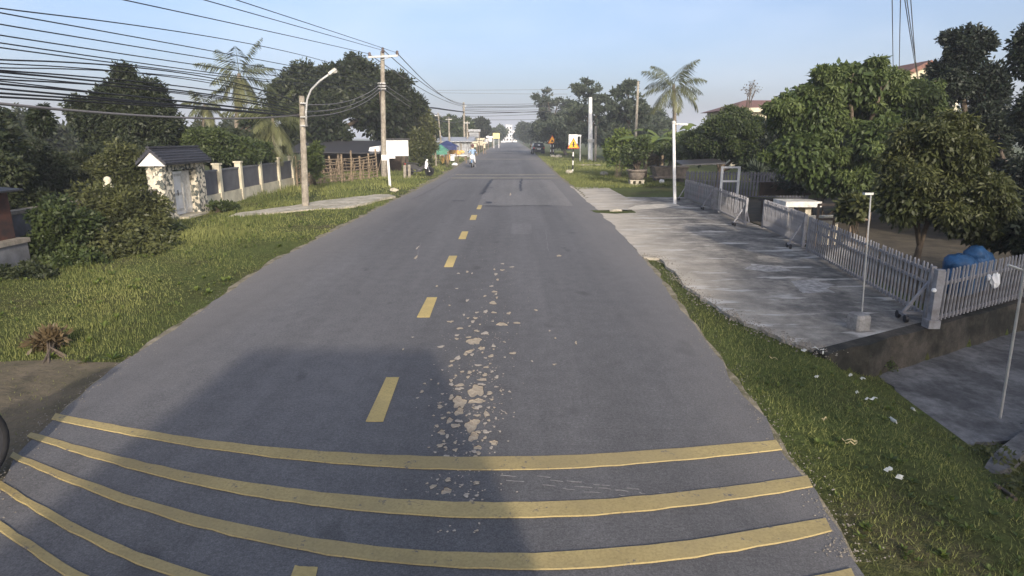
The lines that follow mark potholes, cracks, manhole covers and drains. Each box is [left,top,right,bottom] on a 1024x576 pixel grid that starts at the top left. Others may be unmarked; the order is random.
pothole [464,418,481,433]
pothole [452,395,467,408]
pothole [467,384,484,397]
